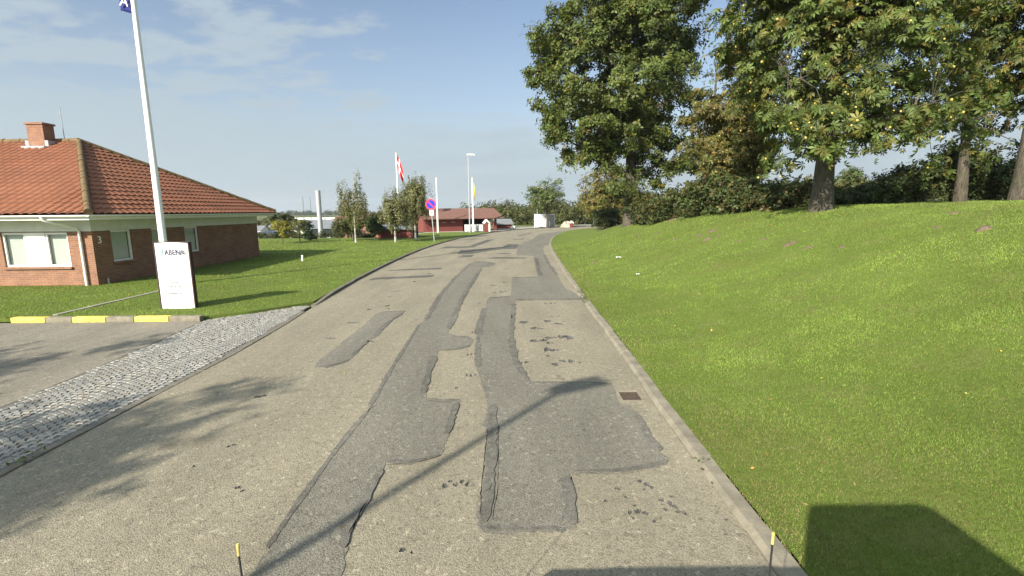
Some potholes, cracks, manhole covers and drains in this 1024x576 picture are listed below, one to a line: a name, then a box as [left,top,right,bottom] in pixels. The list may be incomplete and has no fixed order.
drain grate [616,389,650,401]
